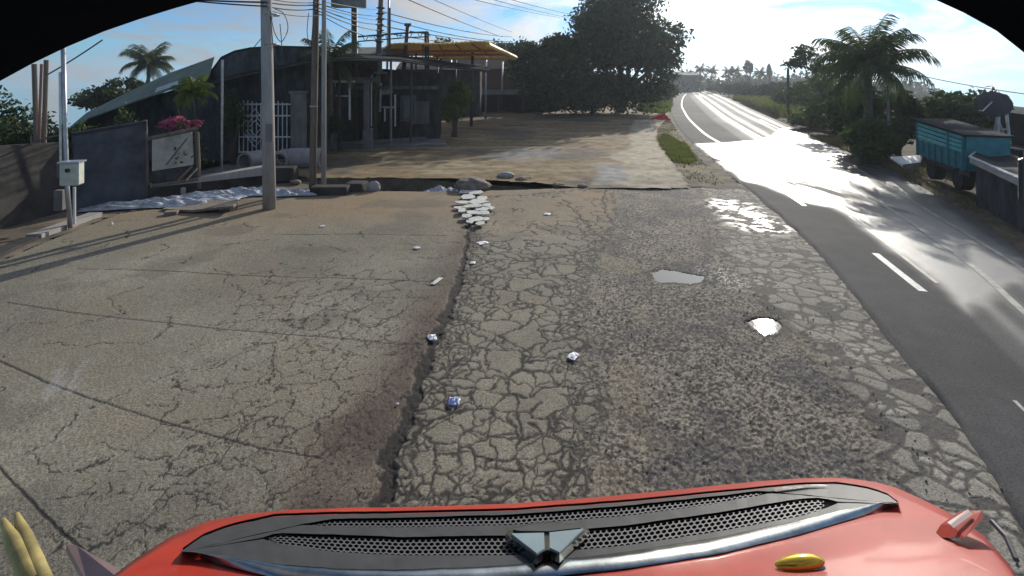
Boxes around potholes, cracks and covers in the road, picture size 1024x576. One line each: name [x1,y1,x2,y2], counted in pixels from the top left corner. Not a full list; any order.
pothole [746,316,783,336]
pothole [651,269,705,284]
crack [695,187,1024,576]
crack [0,188,618,563]
